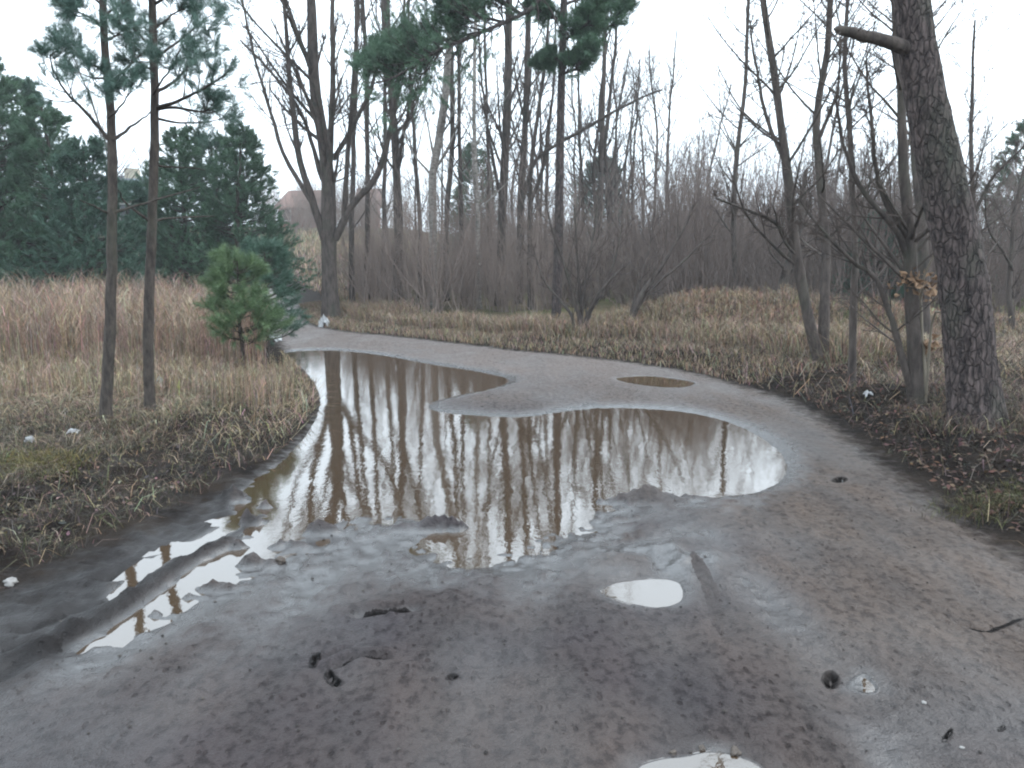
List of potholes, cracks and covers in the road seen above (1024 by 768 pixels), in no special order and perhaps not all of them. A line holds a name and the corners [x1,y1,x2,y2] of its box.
pothole [636,751,764,768]
pothole [821,670,841,690]
pothole [615,376,695,388]
pothole [846,673,880,695]
pothole [600,578,687,608]
